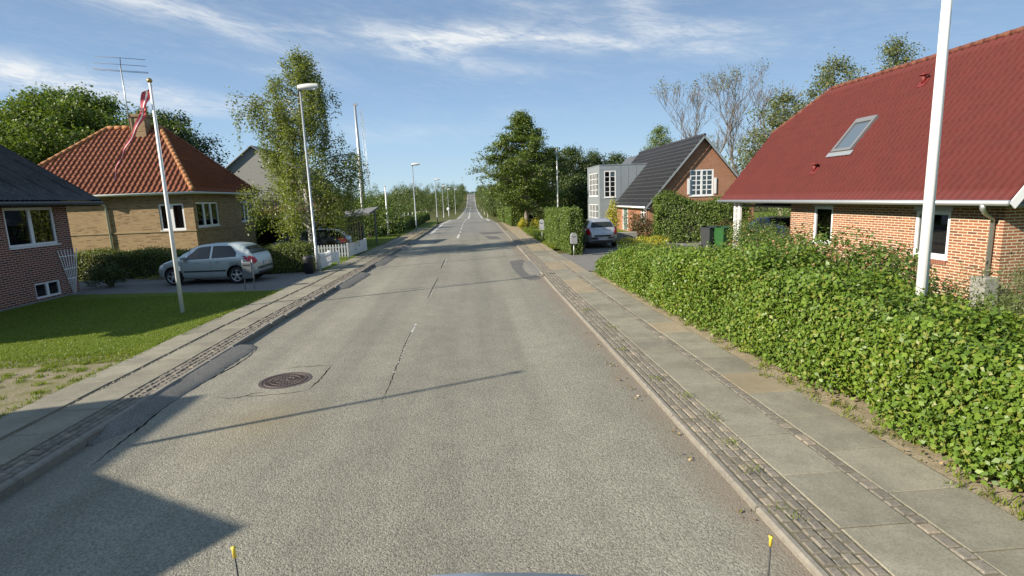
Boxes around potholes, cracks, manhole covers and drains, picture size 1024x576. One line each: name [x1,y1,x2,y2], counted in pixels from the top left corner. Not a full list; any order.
crack [218,365,330,399]
manhole cover [258,372,312,389]
crack [382,334,411,402]
